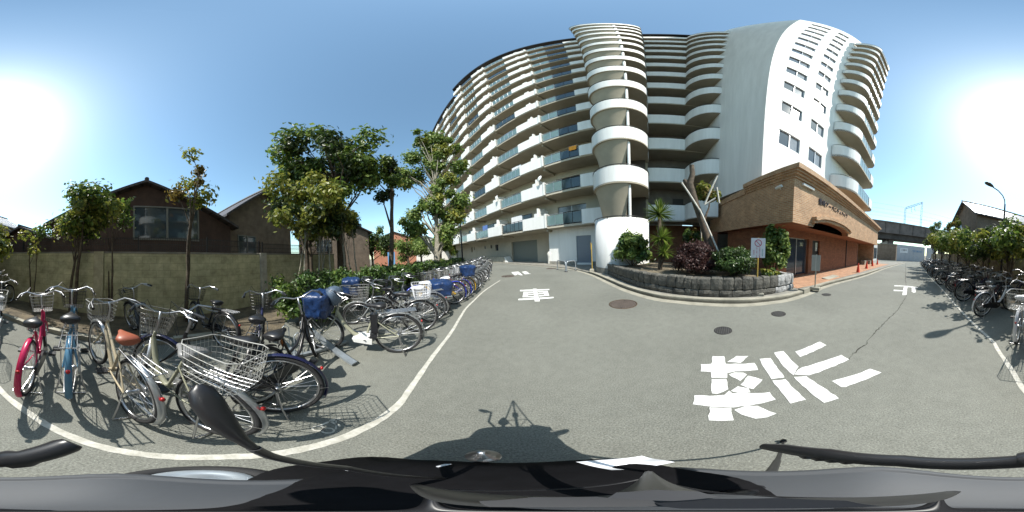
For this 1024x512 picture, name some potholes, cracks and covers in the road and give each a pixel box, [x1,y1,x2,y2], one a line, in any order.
manhole cover [609,299,637,309]
crack [849,272,907,359]
manhole cover [714,326,732,335]
